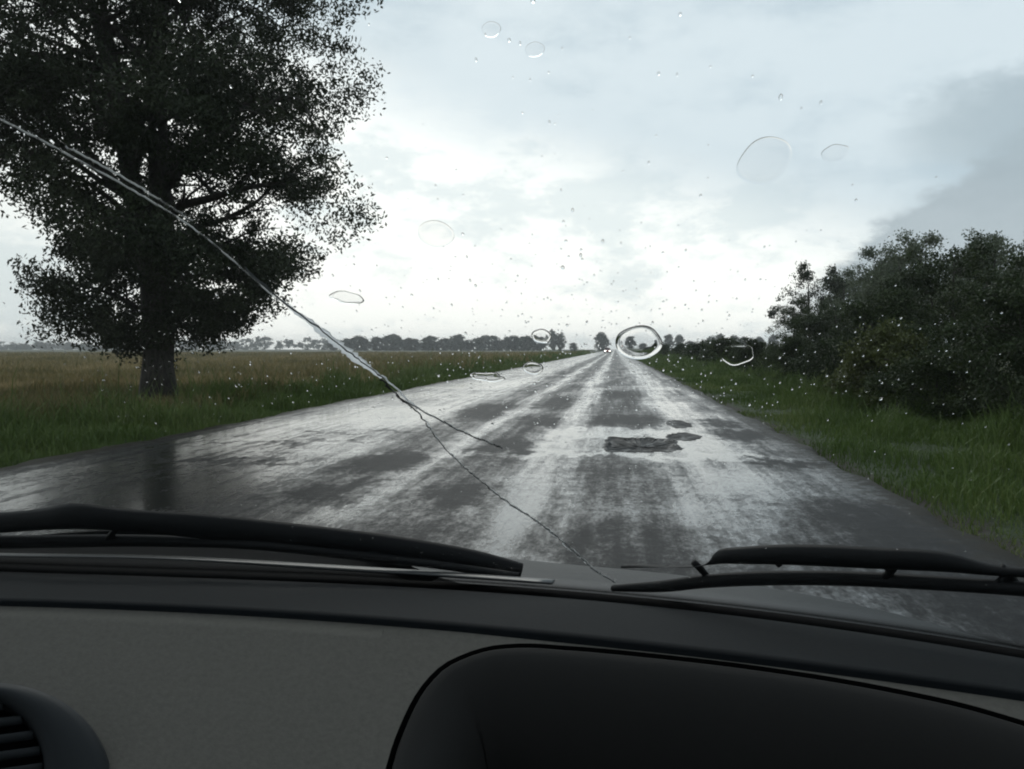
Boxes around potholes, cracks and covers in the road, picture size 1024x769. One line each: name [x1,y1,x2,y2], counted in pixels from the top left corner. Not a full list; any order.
pothole [603,436,683,453]
pothole [665,432,702,441]
pothole [666,420,693,428]
